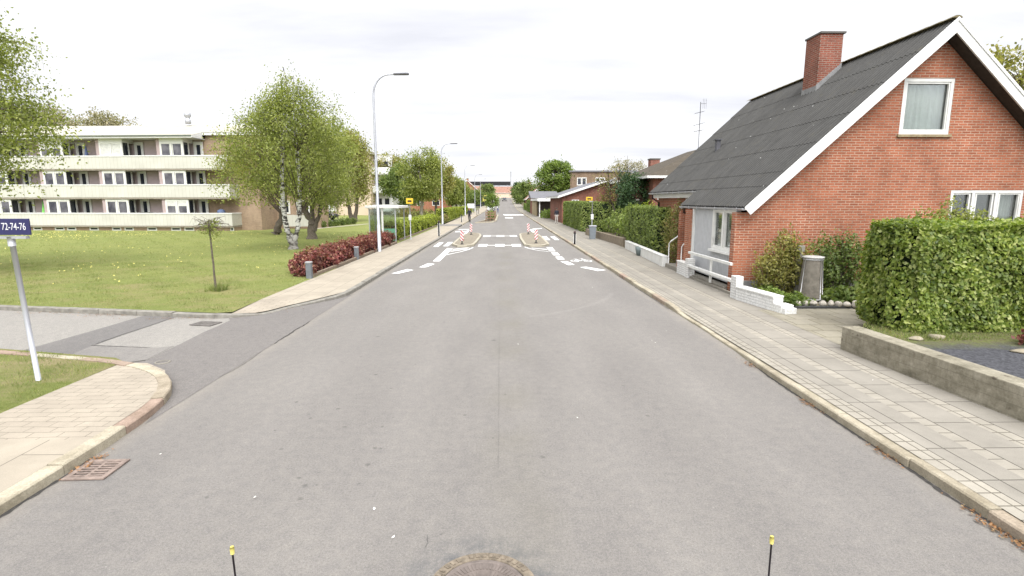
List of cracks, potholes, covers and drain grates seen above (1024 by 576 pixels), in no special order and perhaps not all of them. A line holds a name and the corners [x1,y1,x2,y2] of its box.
manhole cover [433,553,534,576]
drain grate [60,459,130,481]
